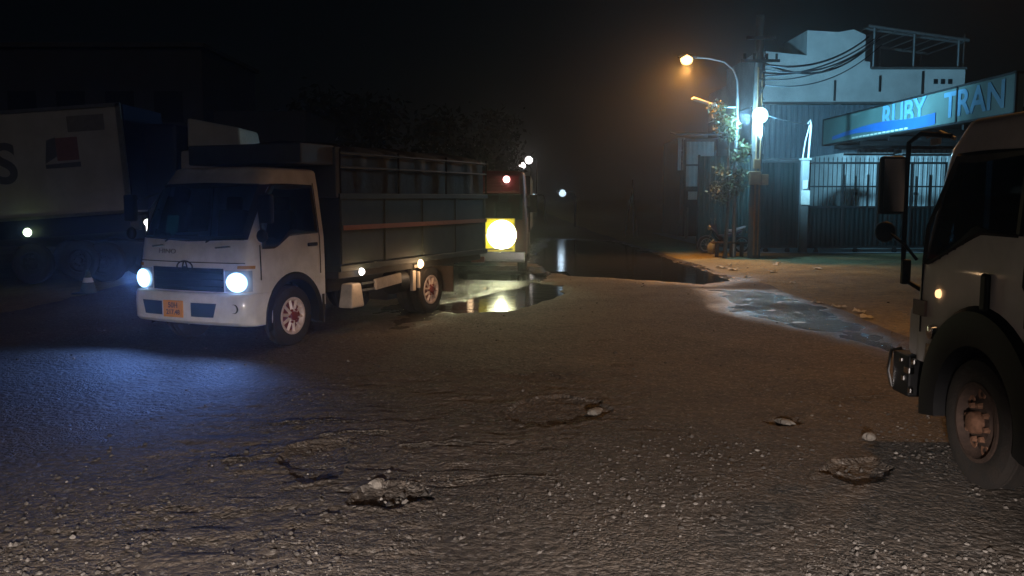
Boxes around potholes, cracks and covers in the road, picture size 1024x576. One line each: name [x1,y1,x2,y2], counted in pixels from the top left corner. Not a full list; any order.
pothole [491,392,625,432]
pothole [749,414,822,432]
crack [221,419,555,484]
pothole [796,453,917,492]
pothole [322,476,452,518]
